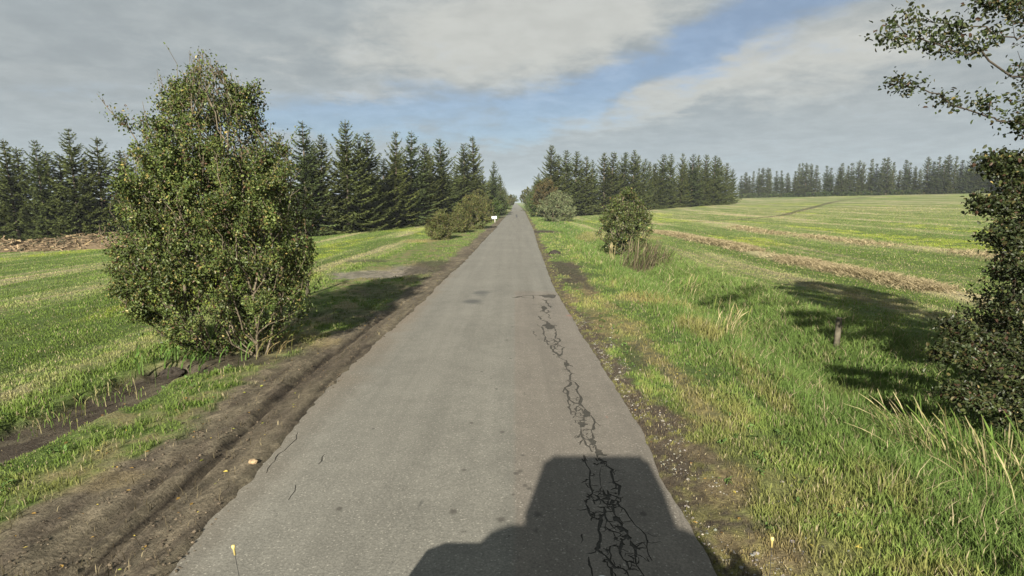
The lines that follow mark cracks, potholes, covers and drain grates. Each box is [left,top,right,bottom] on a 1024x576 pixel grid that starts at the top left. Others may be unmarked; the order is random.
crack [513,295,661,576]
